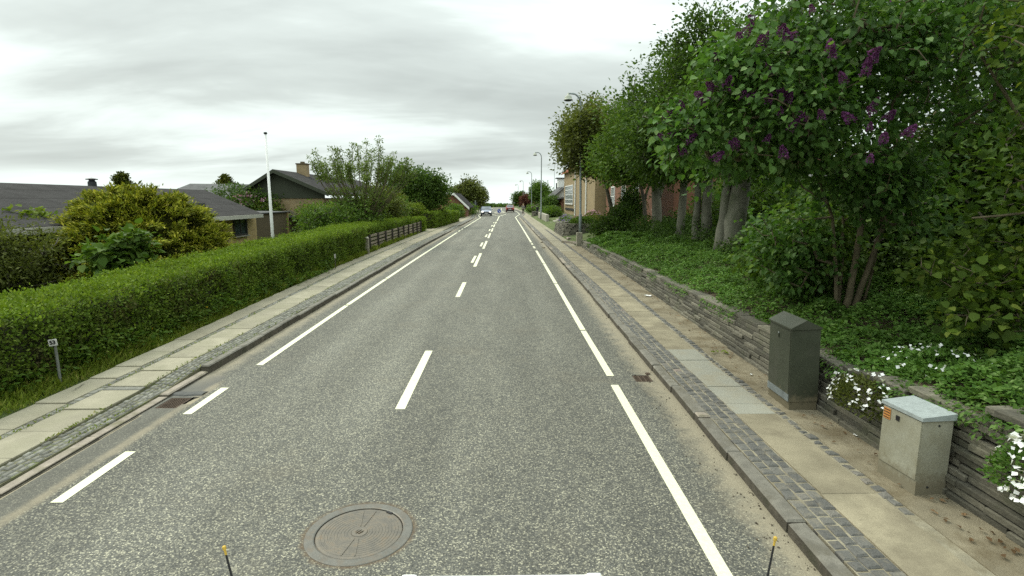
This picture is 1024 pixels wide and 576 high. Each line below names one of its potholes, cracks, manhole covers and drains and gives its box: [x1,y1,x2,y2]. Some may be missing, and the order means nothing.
drain grate [156,398,192,408]
drain grate [632,372,653,382]
manhole cover [303,504,413,567]
